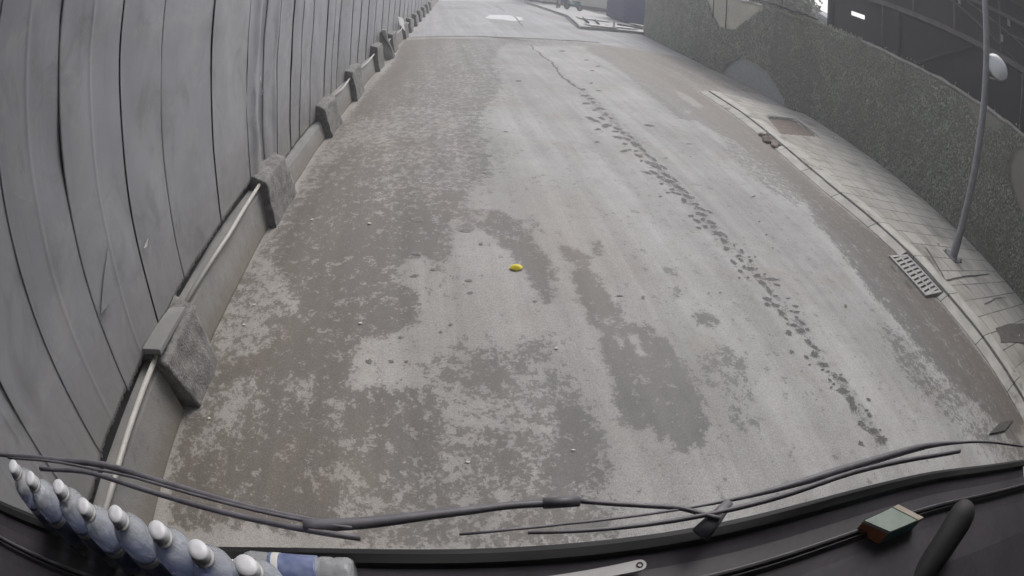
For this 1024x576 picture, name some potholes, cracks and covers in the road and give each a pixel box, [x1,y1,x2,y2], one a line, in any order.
drain grate [889,254,942,297]
crack [432,6,600,90]
